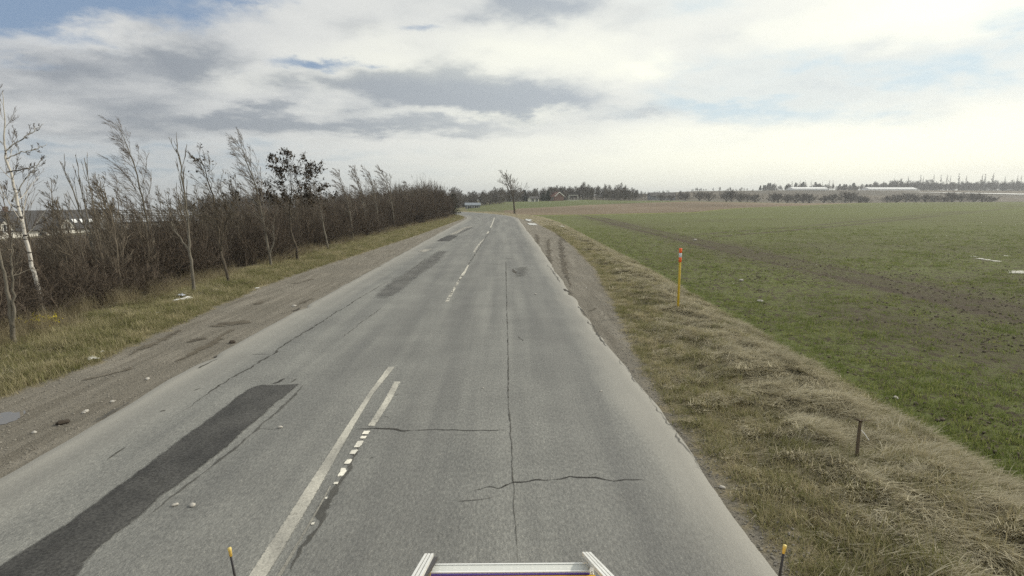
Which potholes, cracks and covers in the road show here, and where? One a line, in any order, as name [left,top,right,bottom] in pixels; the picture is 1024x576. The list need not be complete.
crack [361,264,643,558]
crack [178,286,379,414]
